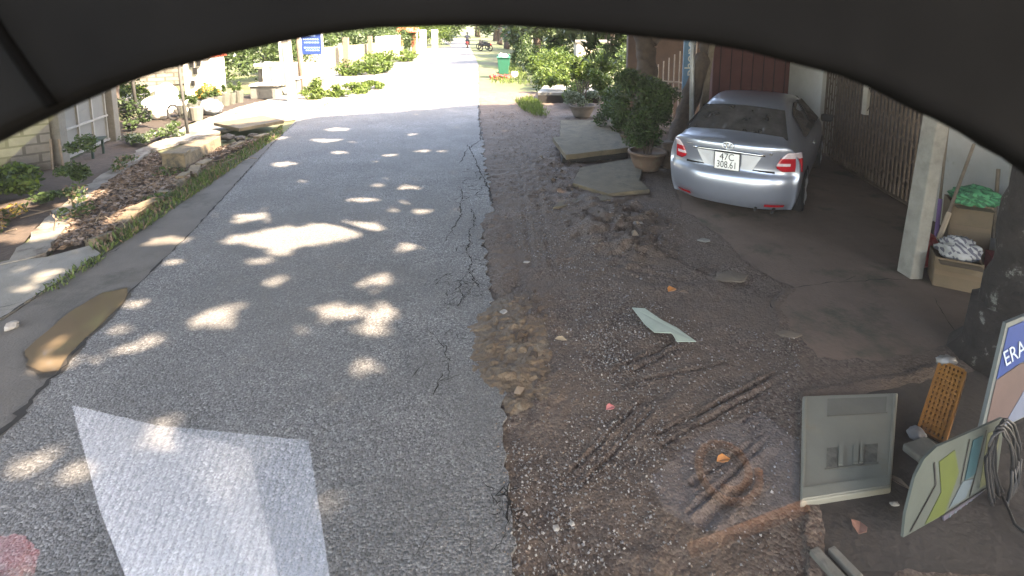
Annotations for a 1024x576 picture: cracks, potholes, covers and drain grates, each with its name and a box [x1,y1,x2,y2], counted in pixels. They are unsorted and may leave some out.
pothole [467,292,552,416]
crack [435,106,494,309]
crack [482,480,554,564]
crack [412,328,466,395]
